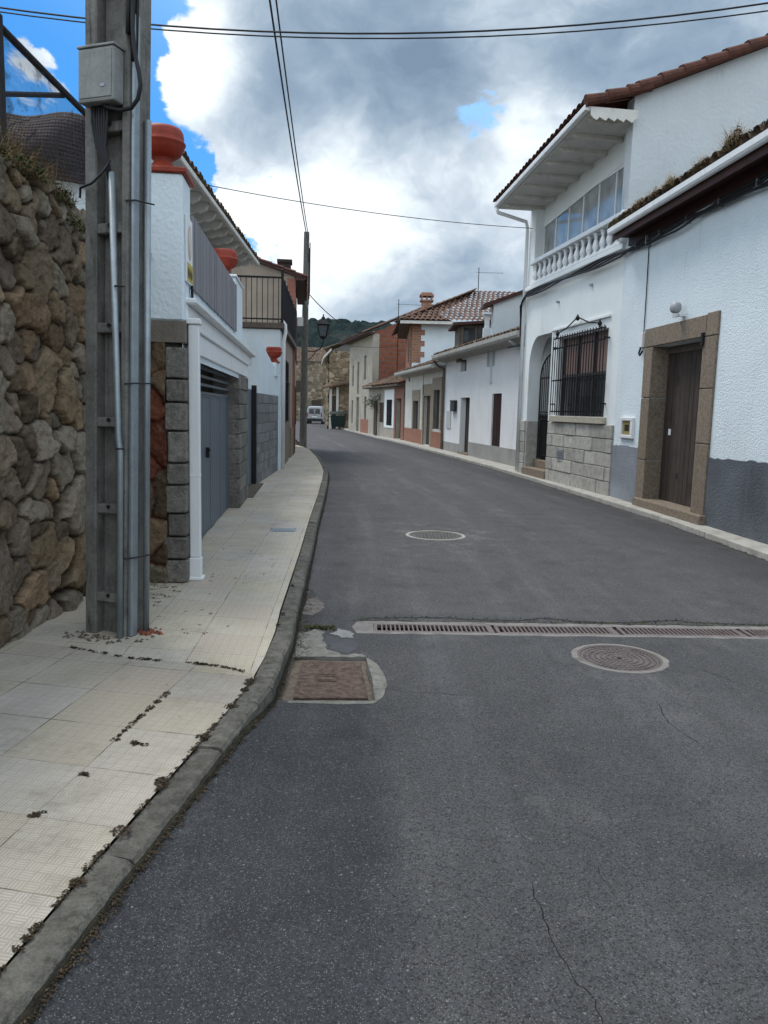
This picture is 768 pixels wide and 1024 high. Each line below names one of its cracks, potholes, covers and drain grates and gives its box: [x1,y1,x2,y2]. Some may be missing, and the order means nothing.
manhole cover [571,643,669,673]
manhole cover [279,657,374,701]
crack [530,881,603,1024]
manhole cover [406,530,466,540]
